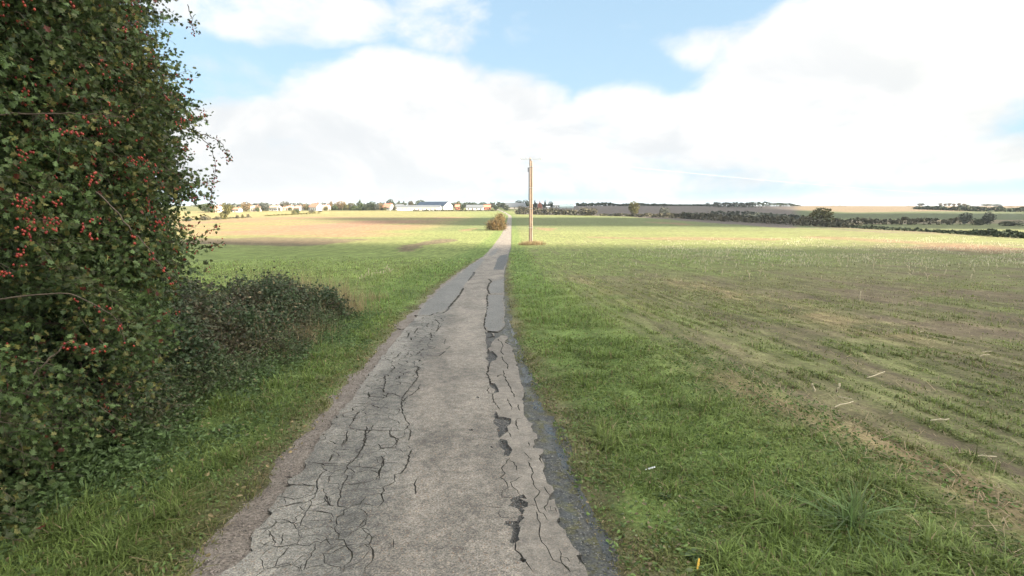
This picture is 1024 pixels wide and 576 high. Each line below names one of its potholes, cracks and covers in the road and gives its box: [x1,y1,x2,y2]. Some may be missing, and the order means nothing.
crack [256,316,450,576]
crack [481,279,584,571]
pothole [493,412,511,438]
pothole [504,494,528,544]
pothole [498,439,513,456]
